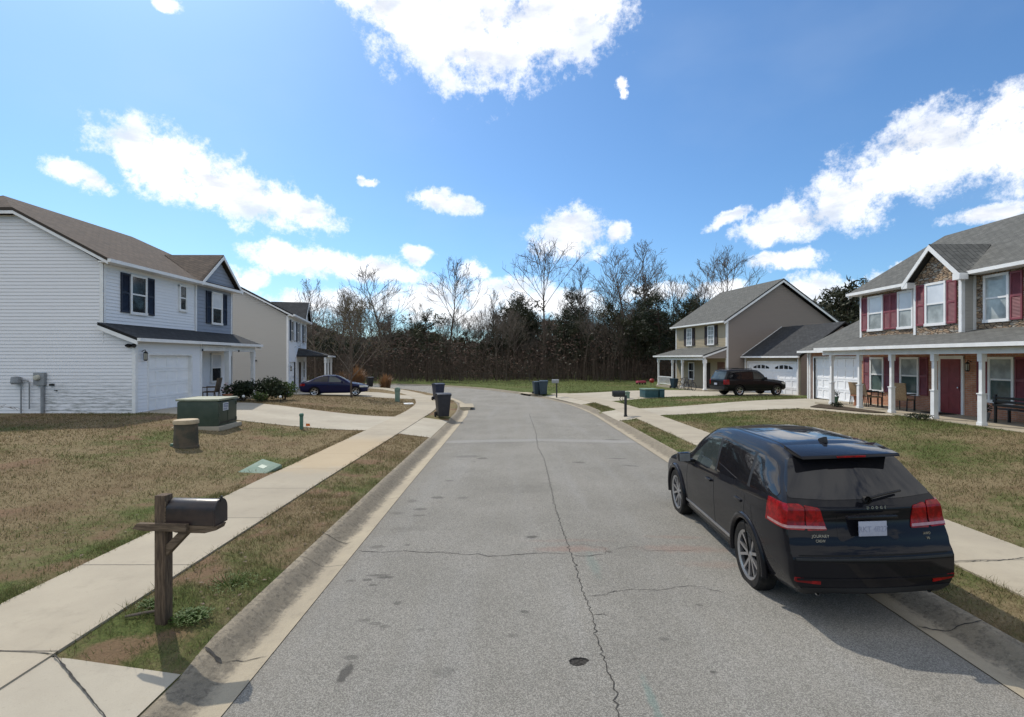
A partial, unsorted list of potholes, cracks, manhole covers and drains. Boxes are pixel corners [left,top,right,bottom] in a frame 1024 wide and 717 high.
utility cover [240,459,282,473]
crack [919,620,982,631]
pothole [569,657,589,666]
crack [0,650,106,717]
crack [323,414,727,717]
